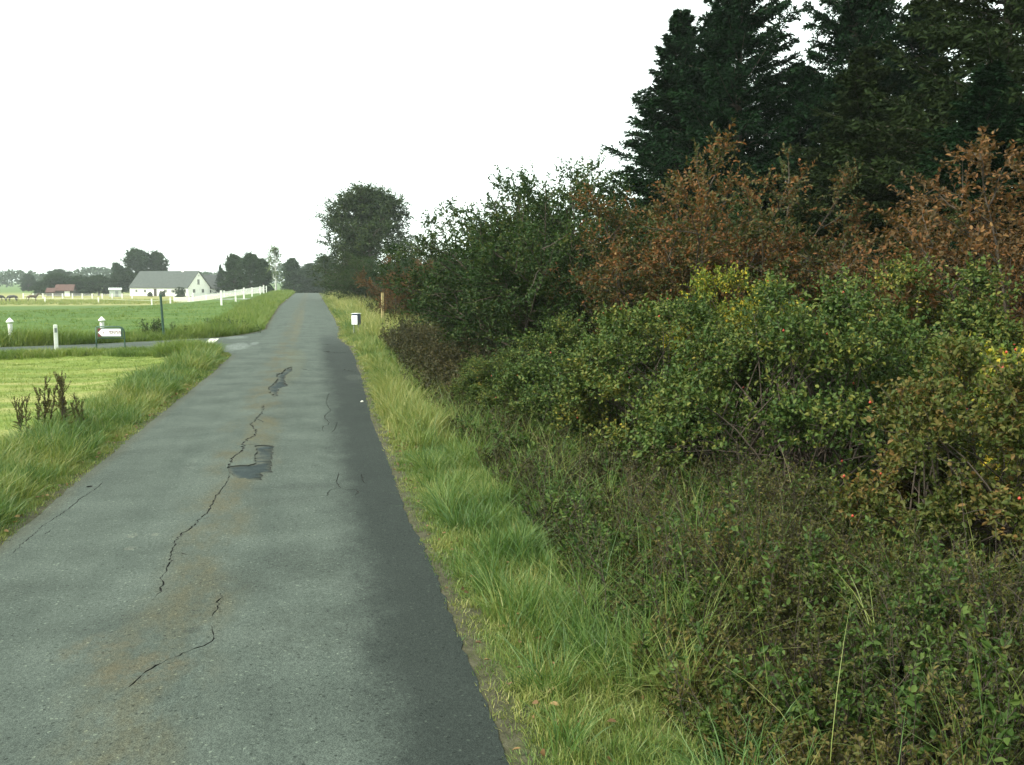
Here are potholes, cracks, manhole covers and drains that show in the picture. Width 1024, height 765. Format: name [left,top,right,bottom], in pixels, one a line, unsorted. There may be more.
crack [155,405,264,597]
crack [13,482,103,553]
pothole [227,445,274,480]
pothole [268,367,293,397]
crack [116,592,223,695]
